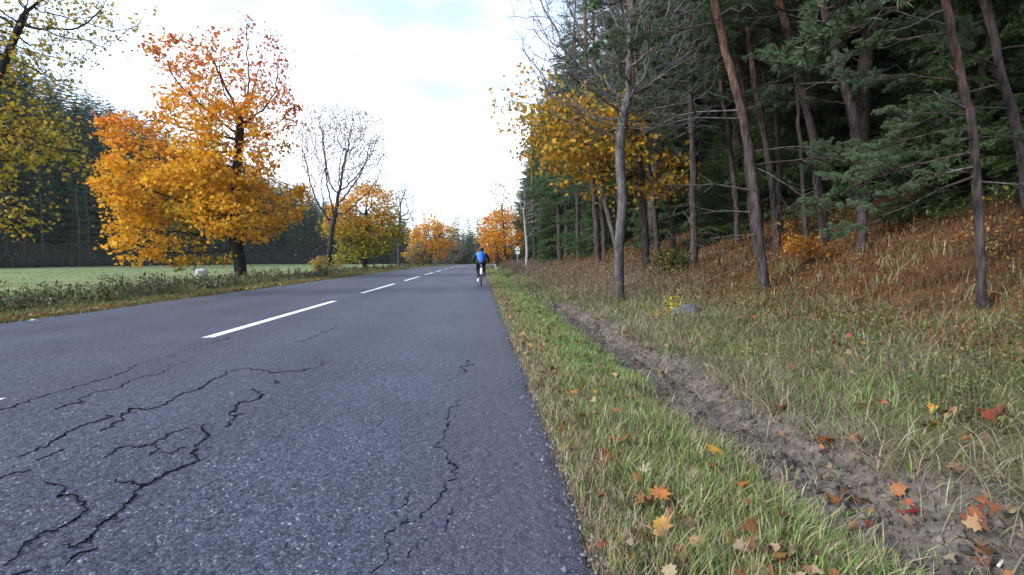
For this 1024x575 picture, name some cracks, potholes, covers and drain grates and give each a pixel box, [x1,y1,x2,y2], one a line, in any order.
crack [0,352,327,575]
crack [371,399,460,573]
